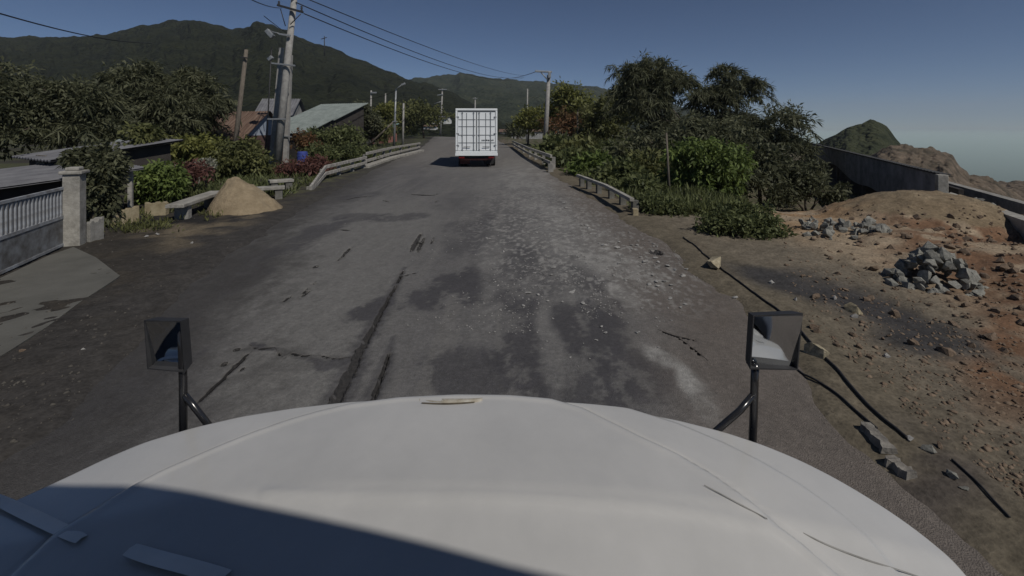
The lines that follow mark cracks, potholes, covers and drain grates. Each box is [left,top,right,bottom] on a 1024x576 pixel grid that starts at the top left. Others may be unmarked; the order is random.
crack [197,271,415,404]
crack [660,330,708,361]
